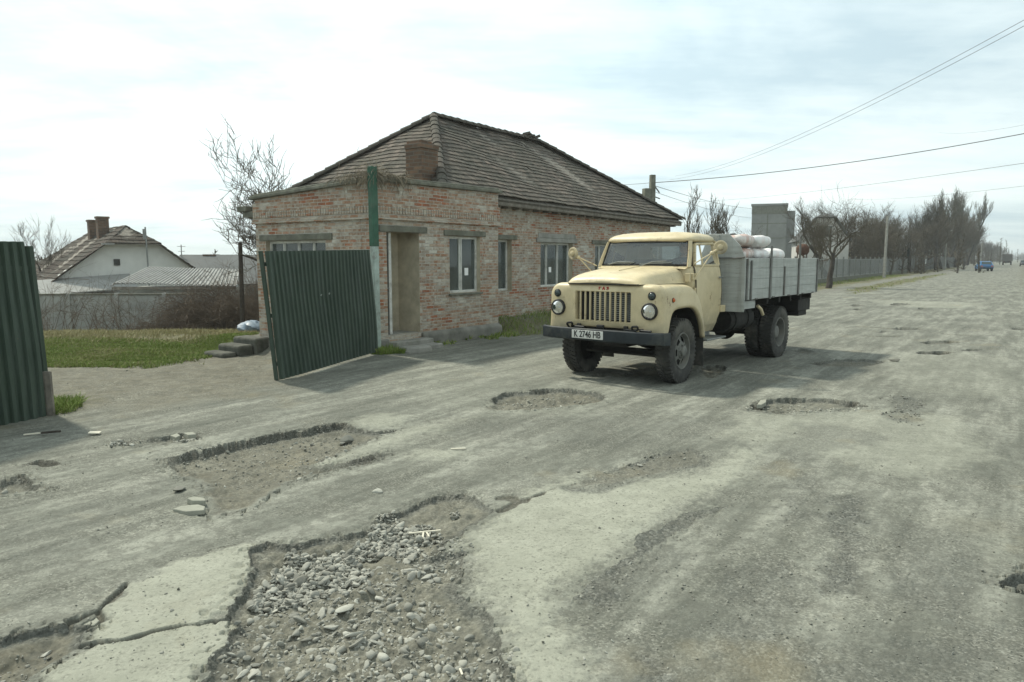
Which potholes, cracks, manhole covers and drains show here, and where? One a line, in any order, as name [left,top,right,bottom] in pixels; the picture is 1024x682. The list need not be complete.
crack [64,581,232,650]
pothole [998,572,1024,595]
pothole [164,422,397,519]
pothole [696,365,727,378]
pothole [743,397,870,415]
pothole [198,493,513,682]
pothole [0,473,49,497]
pothole [482,388,607,412]
